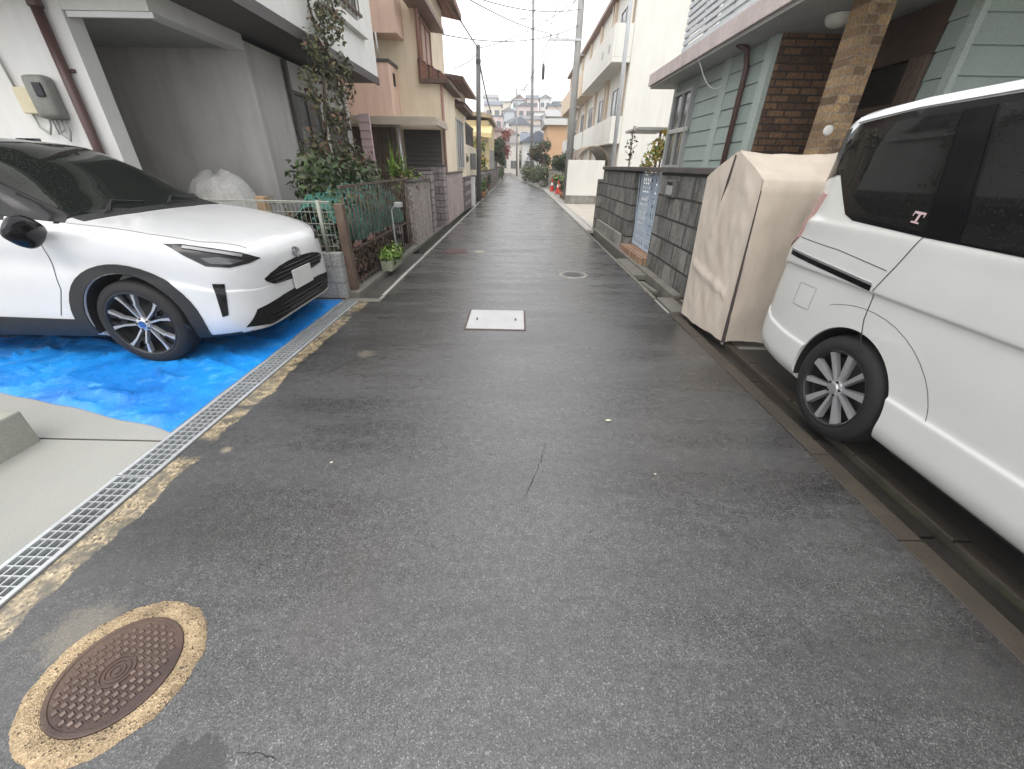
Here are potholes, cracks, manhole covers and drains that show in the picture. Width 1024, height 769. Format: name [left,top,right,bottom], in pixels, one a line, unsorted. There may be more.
drain grate [238,332,321,384]
drain grate [0,476,152,609]
manhole cover [8,601,207,769]
manhole cover [559,271,588,279]
drain grate [118,382,262,478]
manhole cover [464,310,526,331]
drain grate [303,301,358,333]
